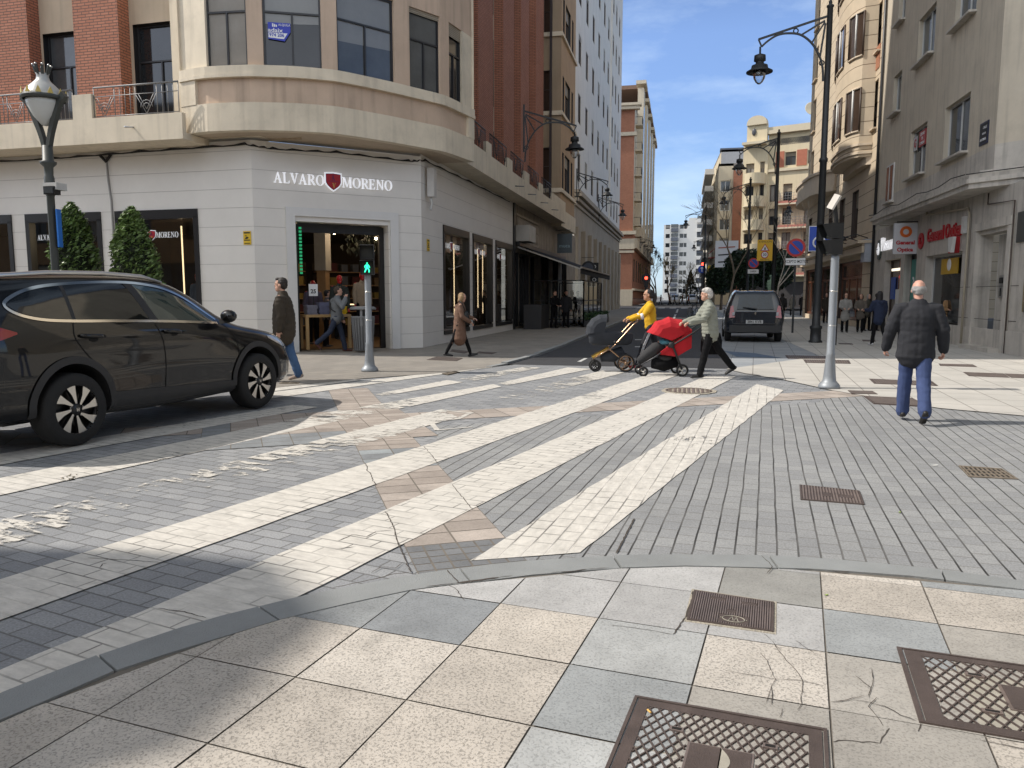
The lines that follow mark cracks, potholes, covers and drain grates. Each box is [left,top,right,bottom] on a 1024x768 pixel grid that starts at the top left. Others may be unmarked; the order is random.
drain grate [958,465,1019,480]
crack [726,635,823,716]
crack [334,564,409,588]
manhole cover [800,484,865,505]
manhole cover [662,387,717,395]
manhole cover [684,589,777,634]
crack [832,673,921,743]
